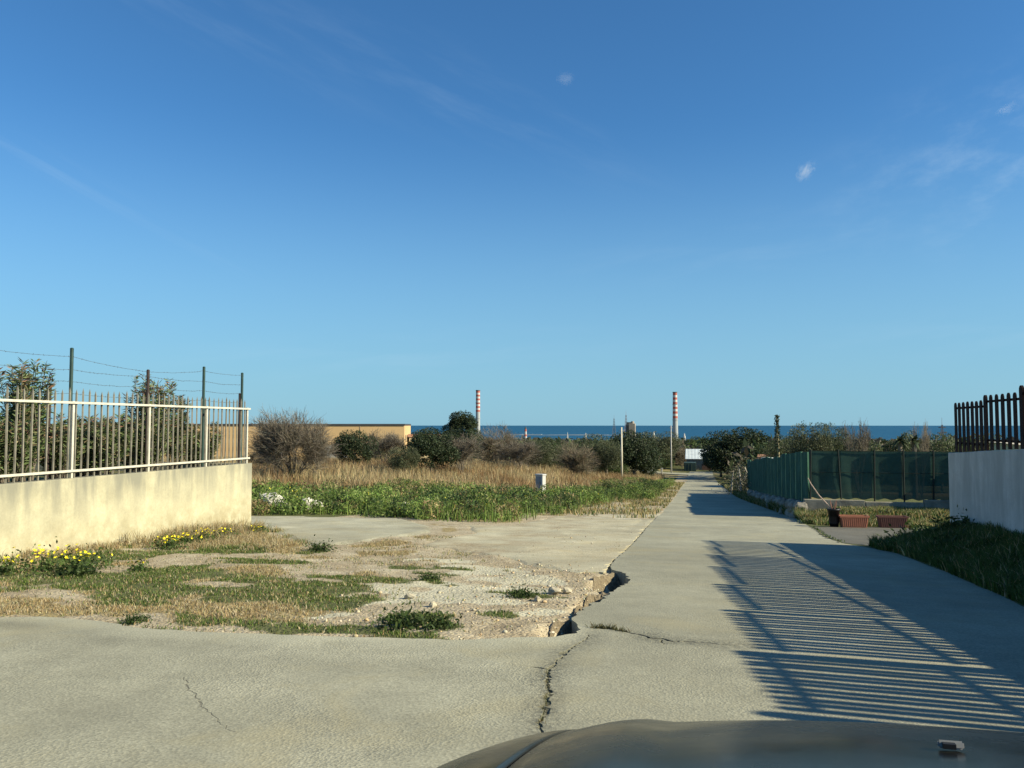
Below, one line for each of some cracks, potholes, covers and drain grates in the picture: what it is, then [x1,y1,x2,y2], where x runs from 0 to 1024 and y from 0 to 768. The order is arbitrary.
crack [530,621,713,733]
crack [183,678,235,732]
